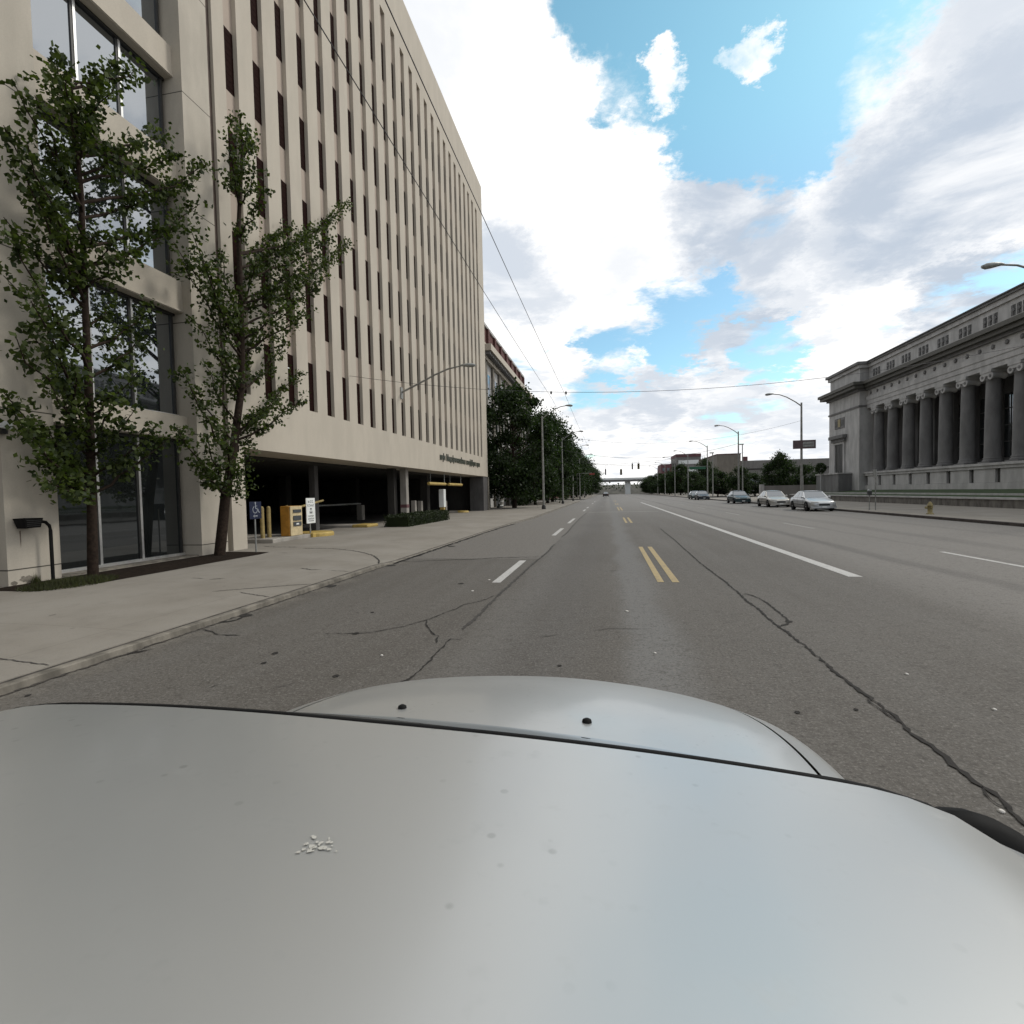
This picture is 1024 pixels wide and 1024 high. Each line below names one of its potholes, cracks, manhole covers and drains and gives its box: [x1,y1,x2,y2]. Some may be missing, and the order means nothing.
crack [661,529,1024,824]
crack [325,596,492,682]
